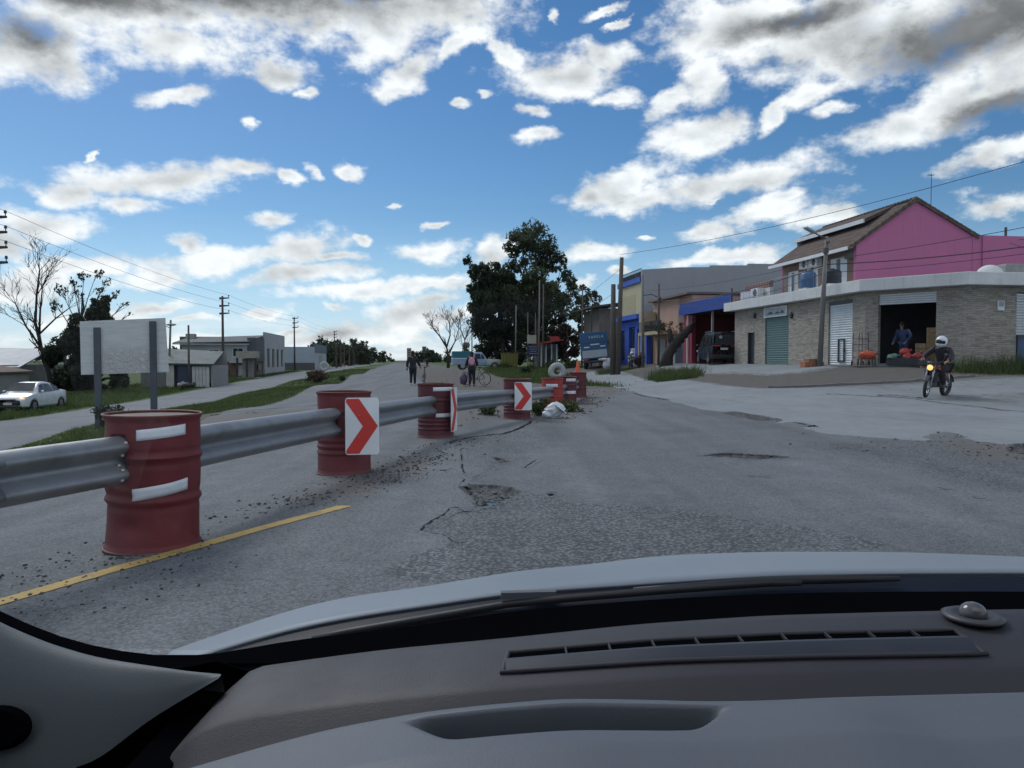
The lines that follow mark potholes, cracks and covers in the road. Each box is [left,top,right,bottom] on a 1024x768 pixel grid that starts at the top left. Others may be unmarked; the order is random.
crack [519,459,542,468]
pothole [454,483,530,510]
pothole [696,452,796,461]
crack [440,421,536,488]
crack [412,505,472,546]
pothole [720,411,783,422]
